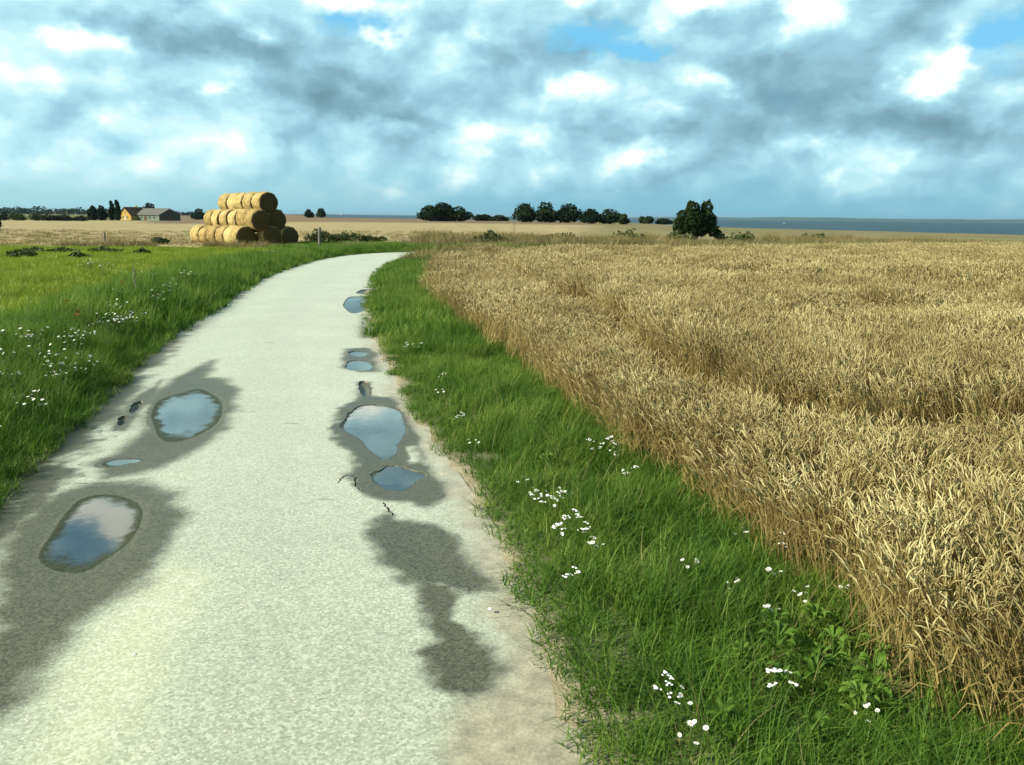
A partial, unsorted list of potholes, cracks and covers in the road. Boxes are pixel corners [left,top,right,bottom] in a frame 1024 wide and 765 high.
pothole [145,389,231,444]
pothole [28,492,152,578]
pothole [370,465,428,491]
pothole [94,457,152,468]
pothole [339,404,409,461]
pothole [358,381,372,397]
pothole [344,360,374,371]
pothole [343,296,367,313]
